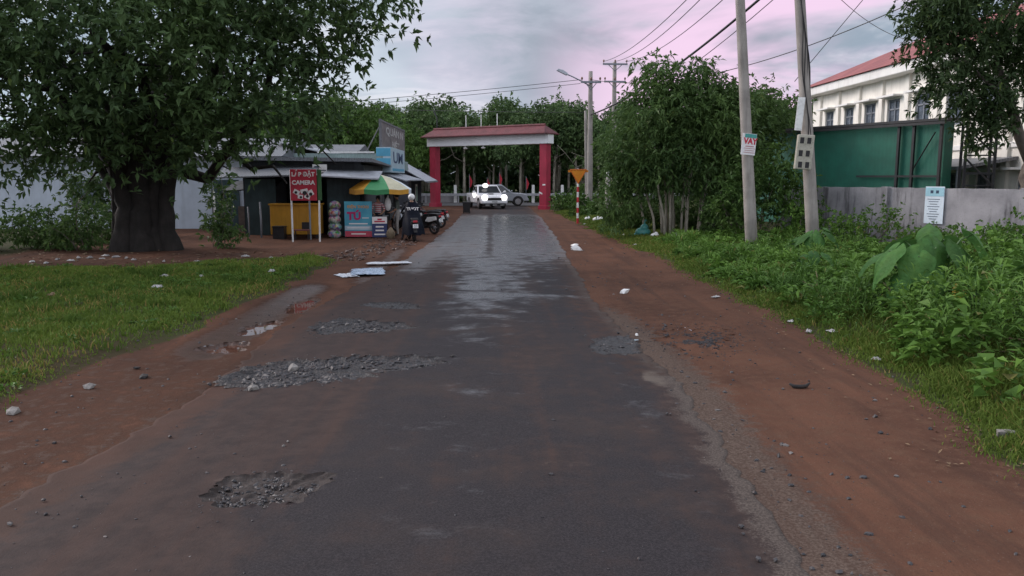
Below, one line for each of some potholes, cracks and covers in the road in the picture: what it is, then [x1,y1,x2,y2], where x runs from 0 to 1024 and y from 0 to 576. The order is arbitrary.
pothole [587,335,642,355]
pothole [360,301,422,309]
pothole [191,468,357,513]
pothole [236,320,285,336]
pothole [284,297,321,314]
pothole [203,353,458,392]
pothole [192,341,252,354]
pothole [307,317,419,336]
